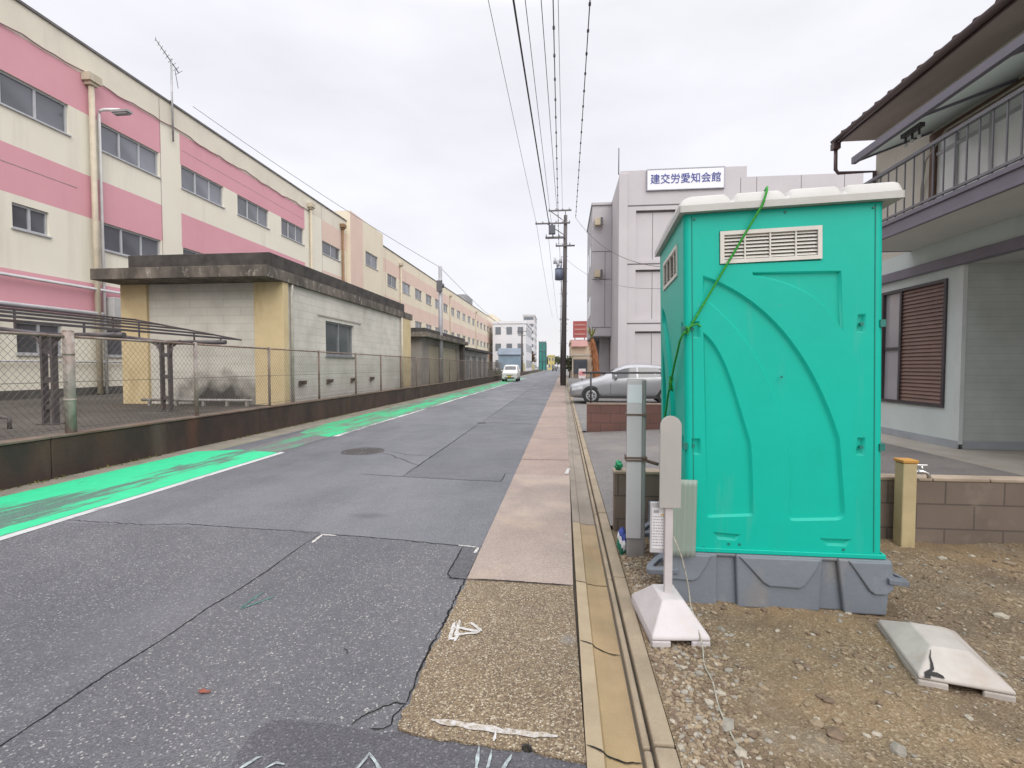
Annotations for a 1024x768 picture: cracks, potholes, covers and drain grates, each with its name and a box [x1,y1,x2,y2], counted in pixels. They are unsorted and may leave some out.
manhole cover [341,447,385,455]
crack [351,545,482,729]
crack [588,745,641,764]
